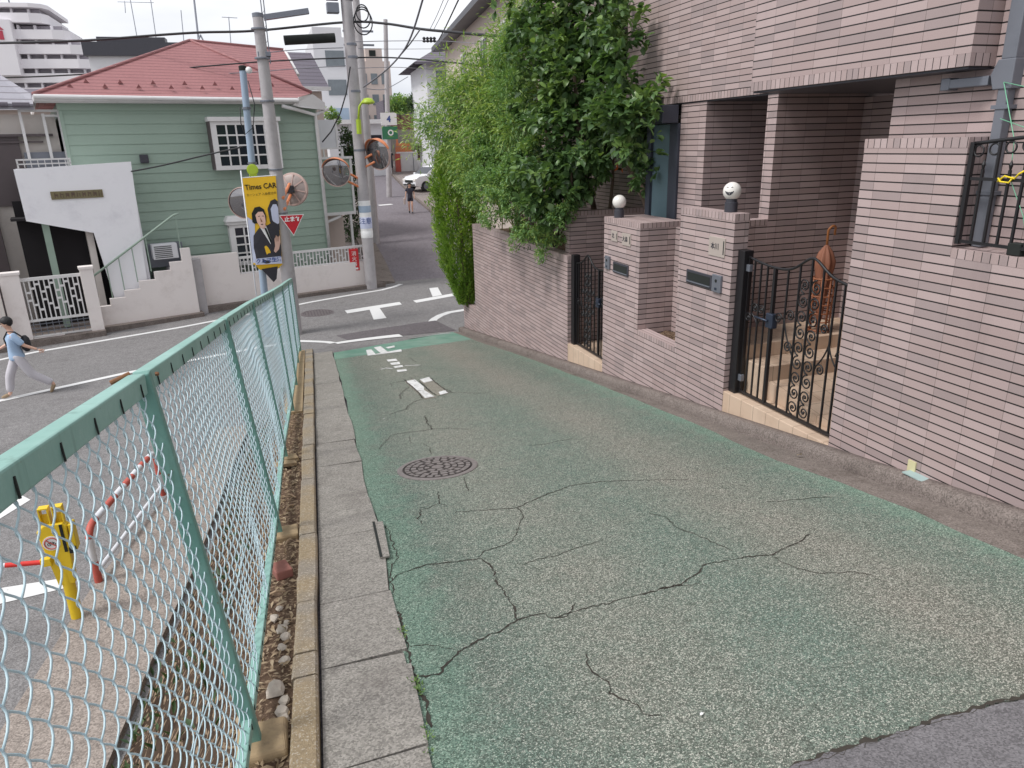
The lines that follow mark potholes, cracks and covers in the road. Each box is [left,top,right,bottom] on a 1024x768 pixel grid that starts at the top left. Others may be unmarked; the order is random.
crack [586,654,653,716]
drain grate [372,521,390,559]
crack [394,479,866,677]
manhole cover [301,309,334,317]
crack [384,526,399,591]
crack [379,360,442,454]
manhole cover [397,455,478,480]
